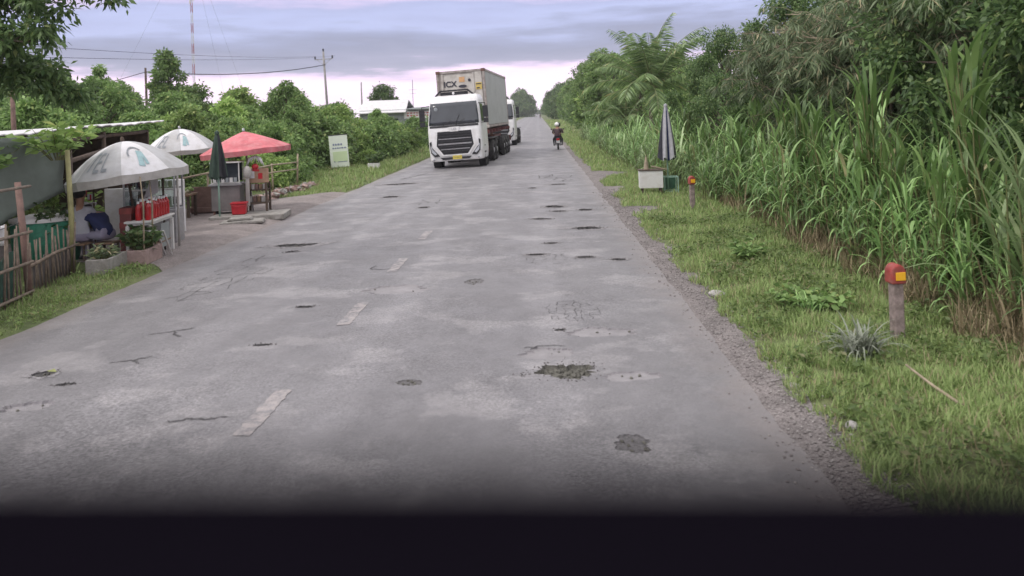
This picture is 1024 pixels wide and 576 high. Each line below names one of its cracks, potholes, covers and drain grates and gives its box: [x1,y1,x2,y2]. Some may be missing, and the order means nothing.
pothole [512,361,605,382]
pothole [613,434,652,453]
pothole [19,367,61,380]
crack [547,300,600,321]
pothole [254,241,339,249]
crack [170,255,274,301]
